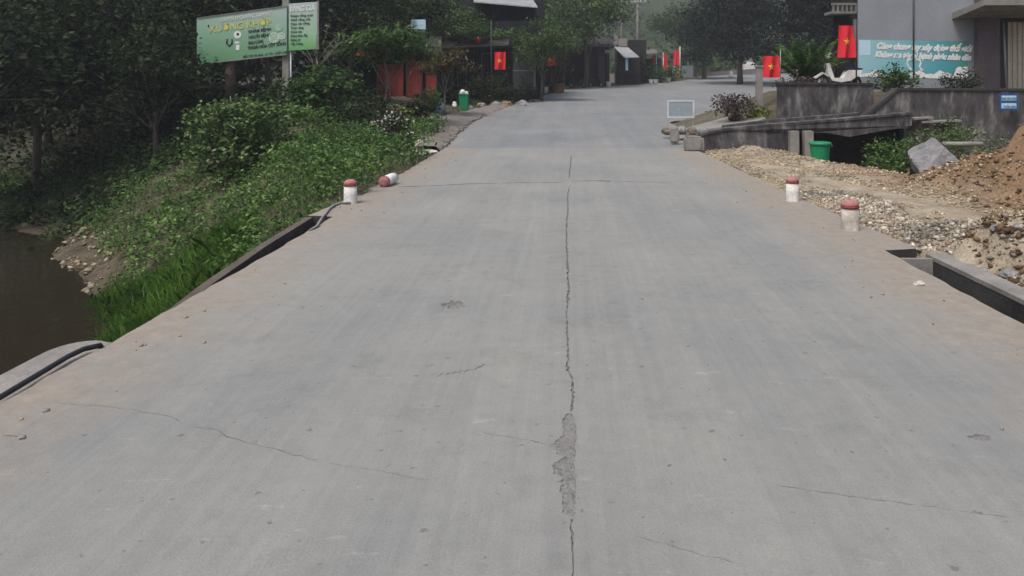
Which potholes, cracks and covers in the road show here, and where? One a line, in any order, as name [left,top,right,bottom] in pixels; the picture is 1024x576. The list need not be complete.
pothole [441,300,466,310]
crack [775,484,1010,518]
crack [635,535,746,567]
crack [57,402,435,481]
crack [402,157,668,576]
